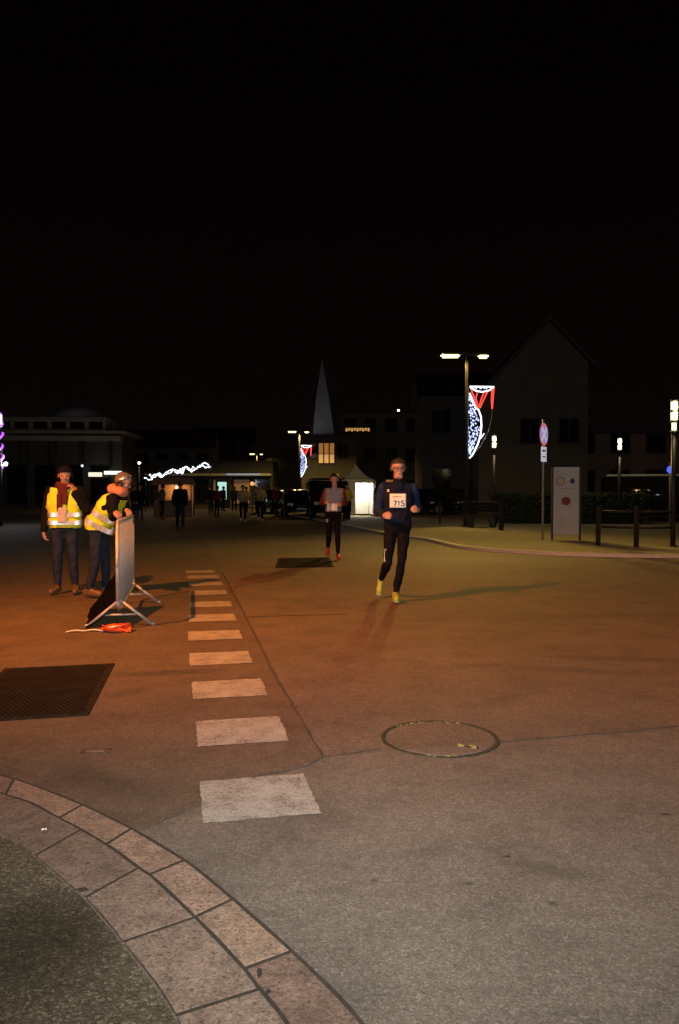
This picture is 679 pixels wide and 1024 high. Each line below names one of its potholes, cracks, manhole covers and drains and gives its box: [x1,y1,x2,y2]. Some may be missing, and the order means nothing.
manhole cover [381,720,500,758]
